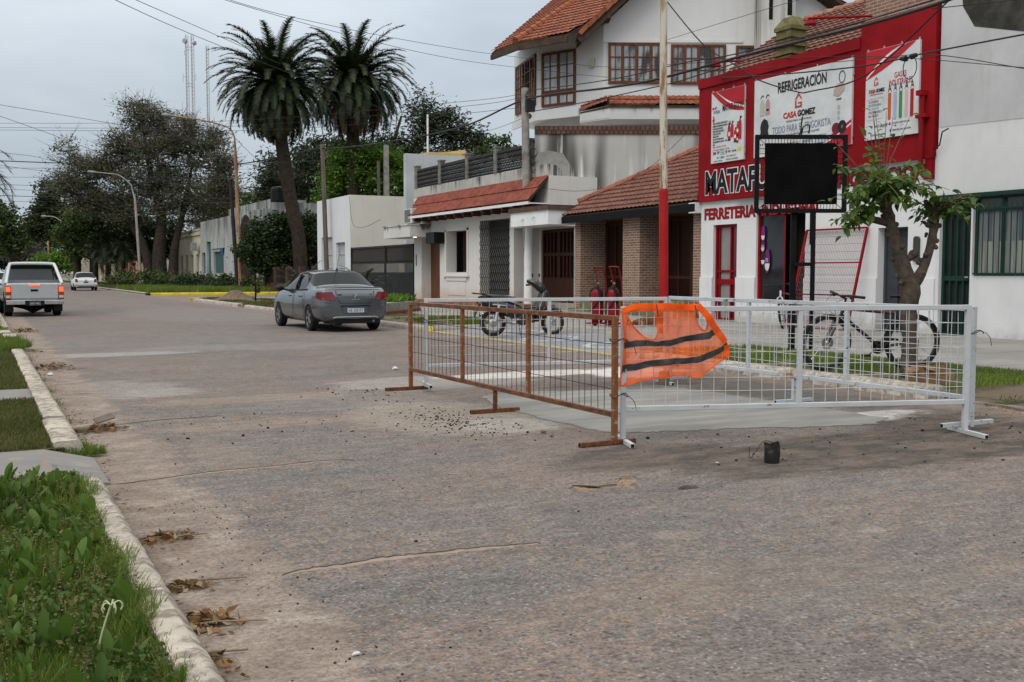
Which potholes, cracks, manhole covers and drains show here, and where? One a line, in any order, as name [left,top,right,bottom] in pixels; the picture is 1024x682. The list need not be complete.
crack [282,542,541,576]
crack [118,459,353,484]
pothole [568,476,640,492]
